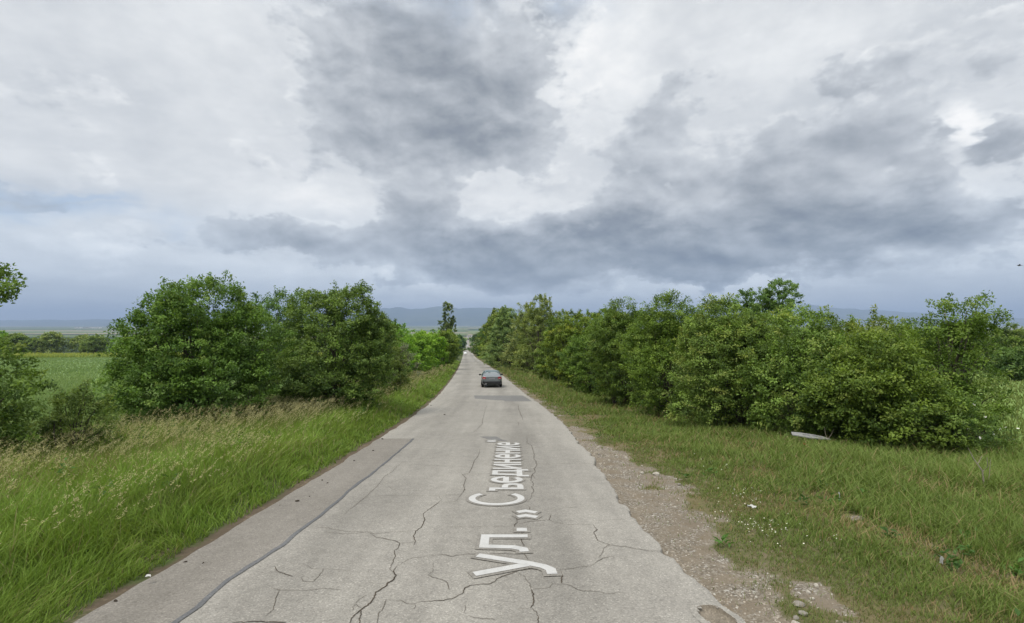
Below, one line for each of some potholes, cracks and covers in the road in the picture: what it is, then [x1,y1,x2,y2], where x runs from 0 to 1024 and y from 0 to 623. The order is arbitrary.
pothole [689,601,746,623]
crack [239,405,649,623]
